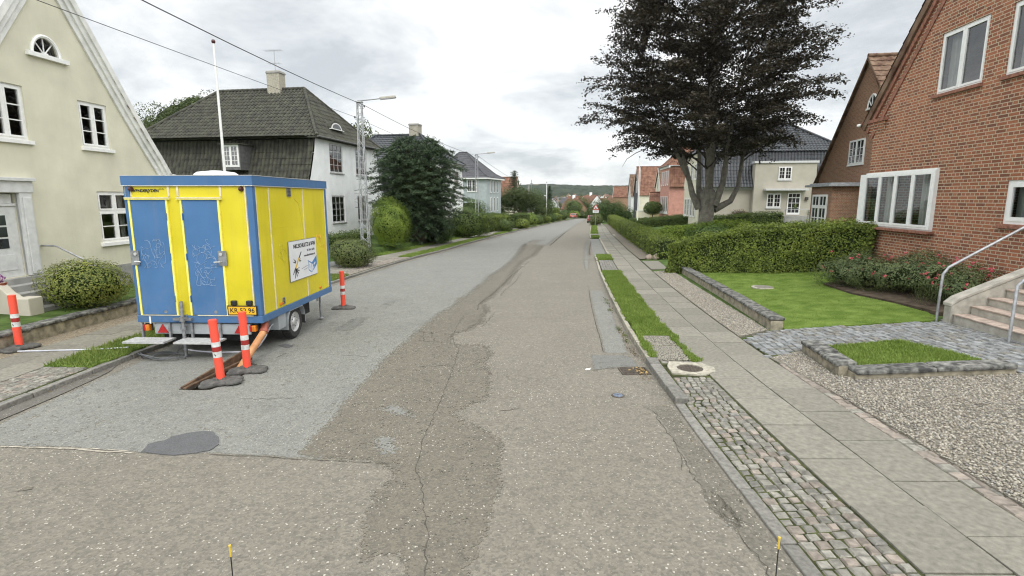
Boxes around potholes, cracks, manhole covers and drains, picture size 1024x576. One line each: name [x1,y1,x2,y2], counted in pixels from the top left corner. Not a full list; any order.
manhole cover [667,361,716,376]
drain grate [618,367,652,375]
crack [415,316,464,576]
